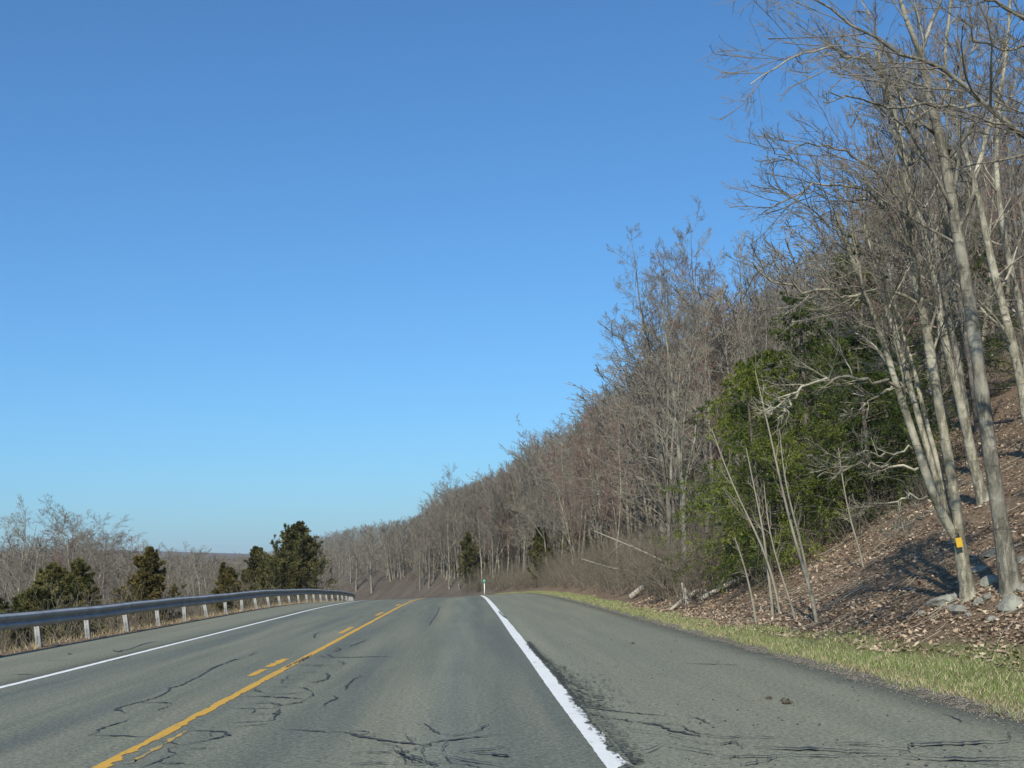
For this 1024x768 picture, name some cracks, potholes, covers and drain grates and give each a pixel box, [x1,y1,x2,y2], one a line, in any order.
crack [145,628,509,766]
crack [584,707,1012,764]
